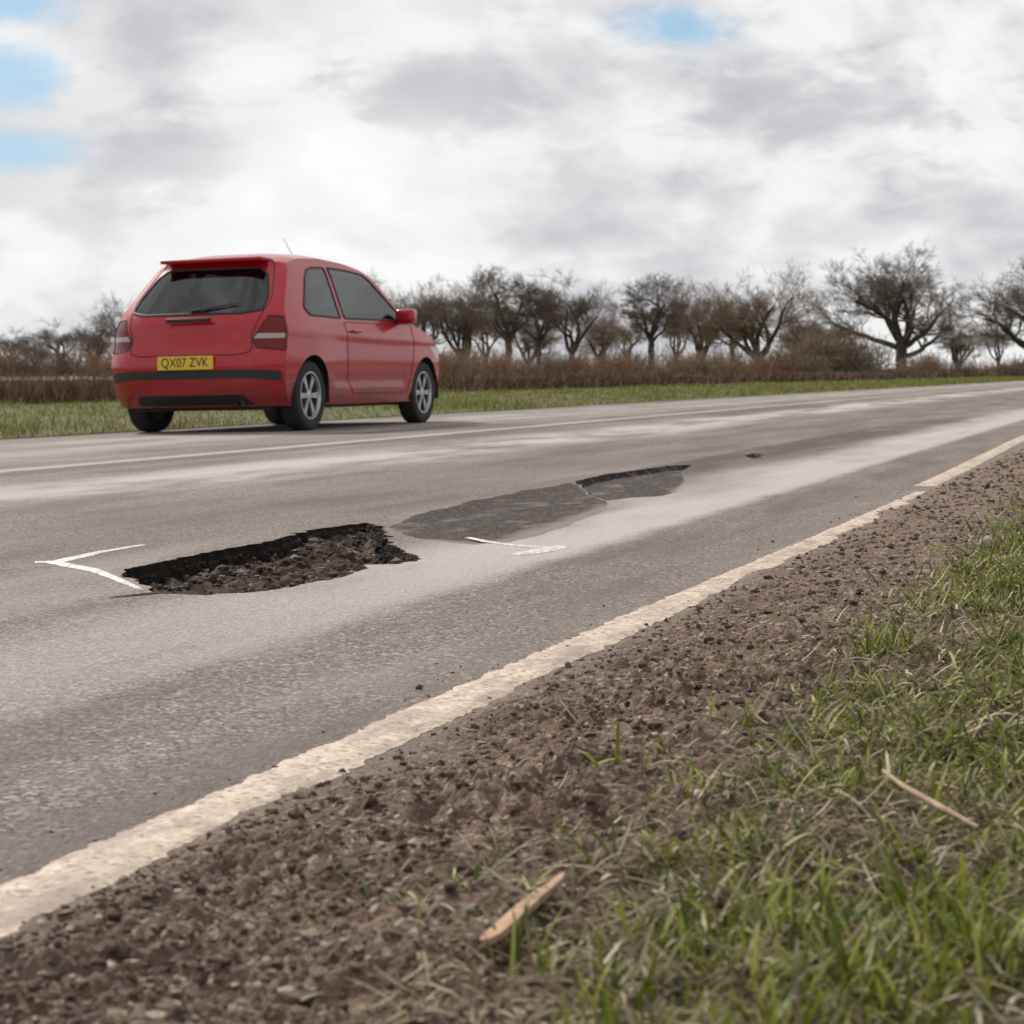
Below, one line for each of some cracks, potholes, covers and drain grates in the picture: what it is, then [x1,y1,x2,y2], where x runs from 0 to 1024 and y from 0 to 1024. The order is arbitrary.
pothole [575,465,691,501]
pothole [121,523,420,596]
